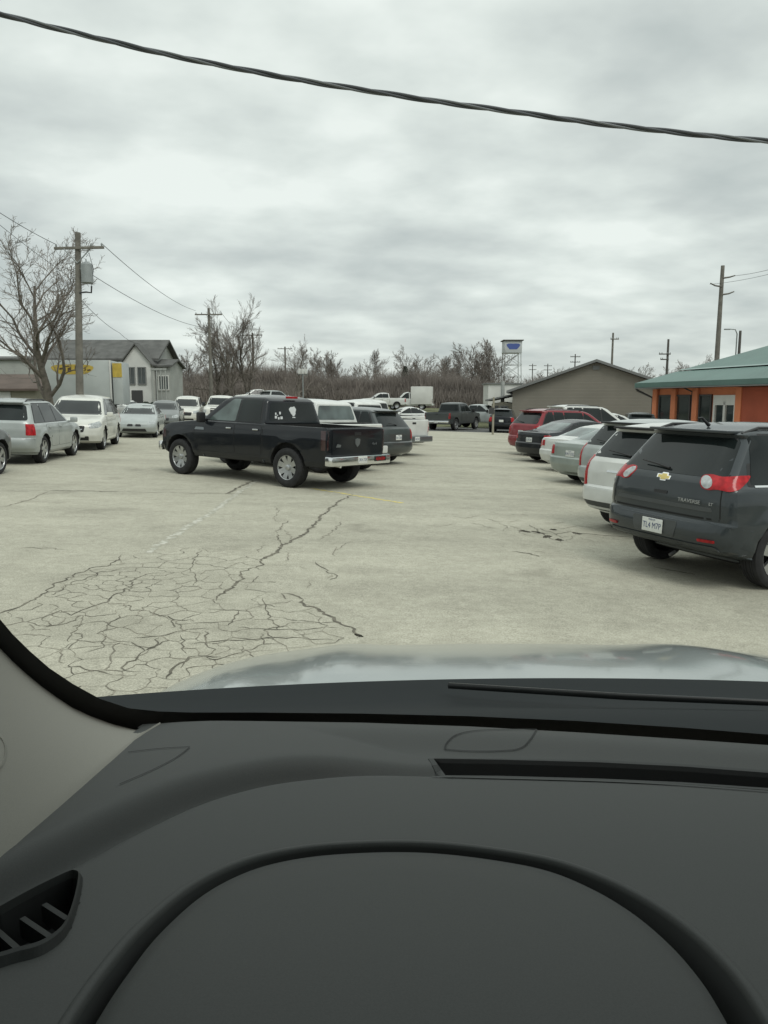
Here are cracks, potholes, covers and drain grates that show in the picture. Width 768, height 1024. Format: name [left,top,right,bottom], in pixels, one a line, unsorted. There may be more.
crack [433,513,625,557]
crack [0,496,358,696]
